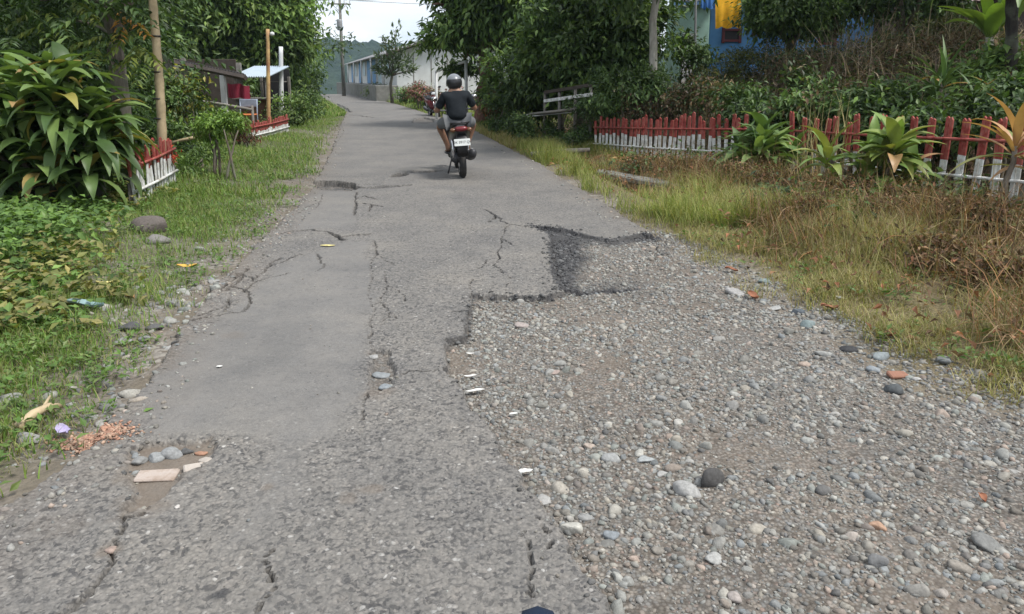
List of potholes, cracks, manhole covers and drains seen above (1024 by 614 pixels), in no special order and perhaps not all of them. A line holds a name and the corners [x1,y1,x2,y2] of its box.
crack [512,511,562,609]
pothole [110,432,225,519]
pothole [313,180,360,191]
pothole [439,244,1024,614]
crack [449,208,533,314]
crack [47,501,167,614]
crack [246,545,285,614]
crack [187,169,444,423]
